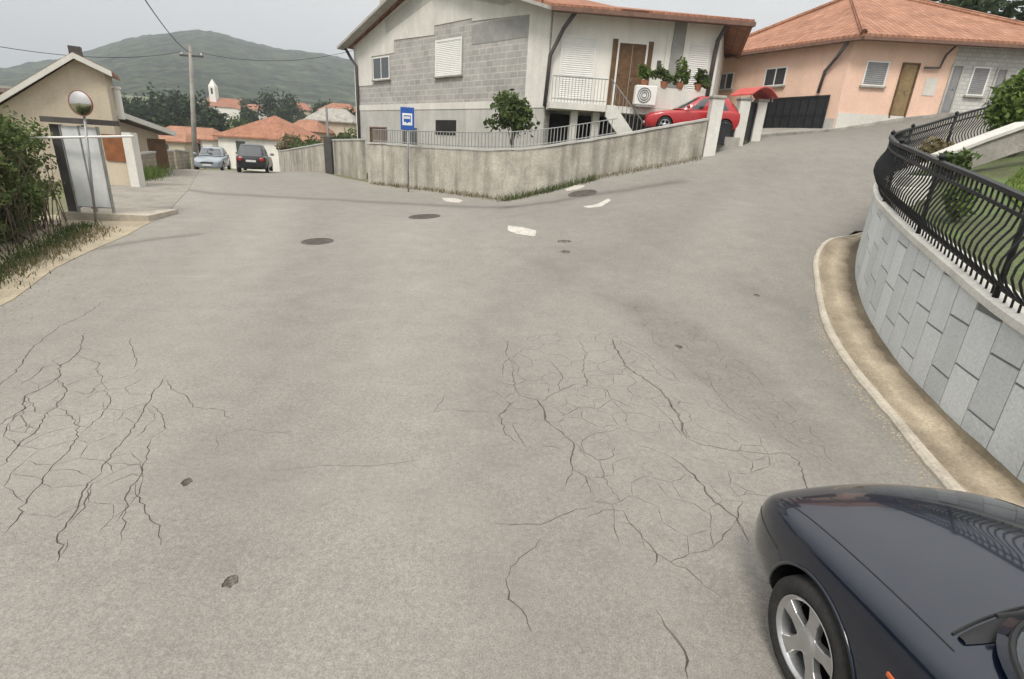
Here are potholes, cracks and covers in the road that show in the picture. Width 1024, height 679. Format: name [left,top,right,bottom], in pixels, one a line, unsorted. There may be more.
pothole [221,575,239,589]
crack [0,302,292,561]
crack [656,610,689,679]
crack [428,304,825,632]
